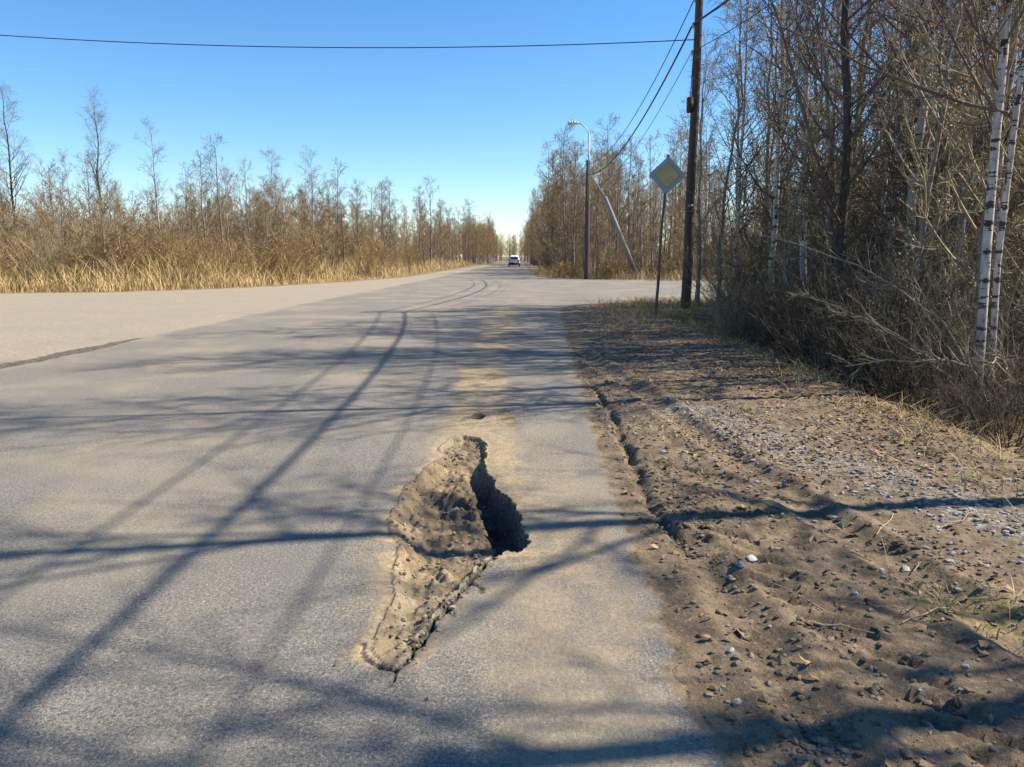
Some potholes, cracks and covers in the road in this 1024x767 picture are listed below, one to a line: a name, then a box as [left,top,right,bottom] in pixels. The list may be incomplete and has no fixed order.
pothole [372,435,529,667]
